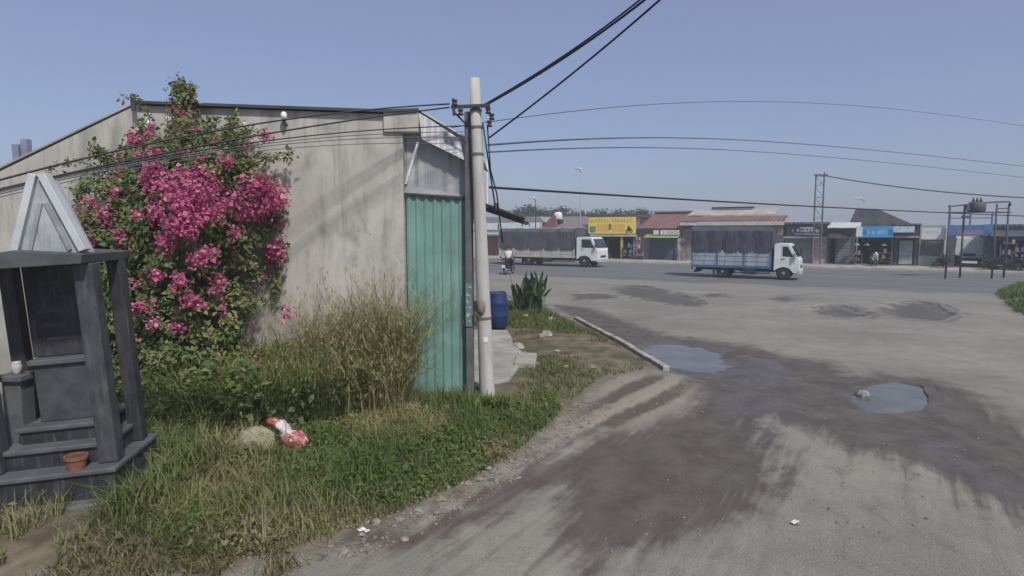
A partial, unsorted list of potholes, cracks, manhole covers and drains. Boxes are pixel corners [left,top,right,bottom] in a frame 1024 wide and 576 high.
pothole [832,377,951,421]
